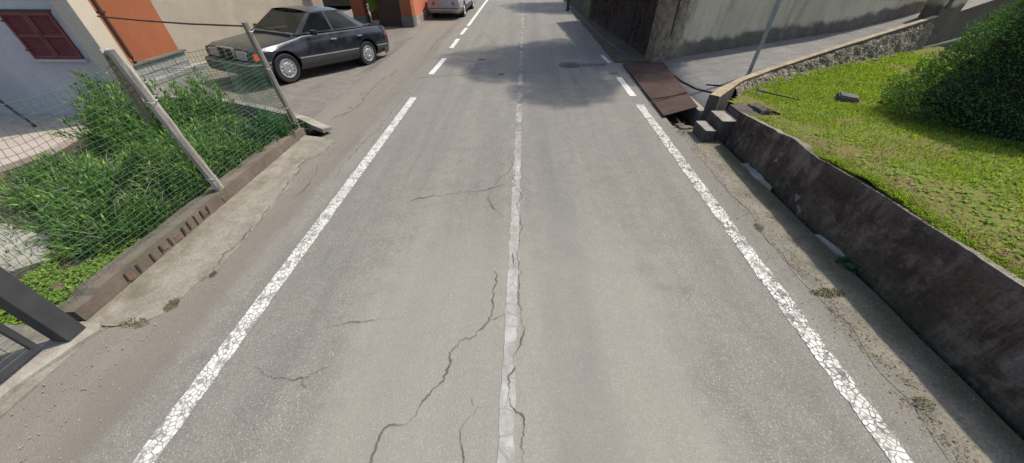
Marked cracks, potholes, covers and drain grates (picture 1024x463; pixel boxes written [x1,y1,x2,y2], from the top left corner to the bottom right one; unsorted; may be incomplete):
crack [253,366,328,387]
crack [369,154,525,463]
